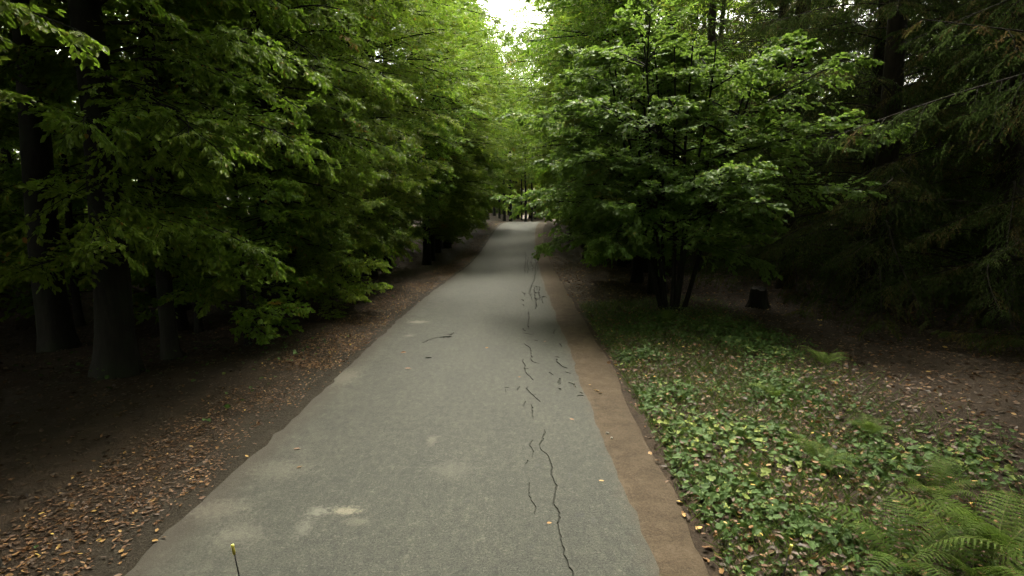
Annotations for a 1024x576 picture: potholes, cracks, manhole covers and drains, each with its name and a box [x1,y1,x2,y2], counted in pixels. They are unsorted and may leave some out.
crack [505,255,584,576]
